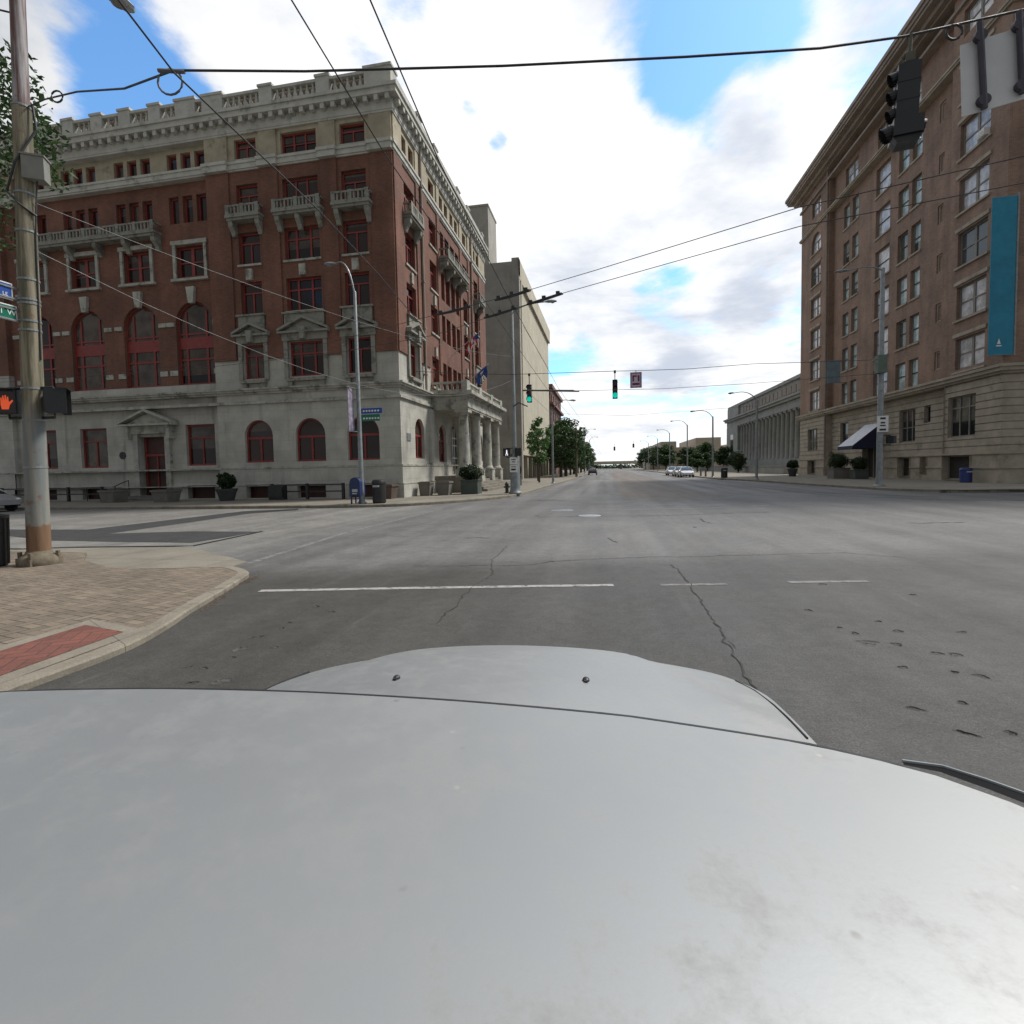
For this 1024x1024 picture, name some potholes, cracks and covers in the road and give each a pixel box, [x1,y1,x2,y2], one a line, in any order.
crack [427,538,897,691]
